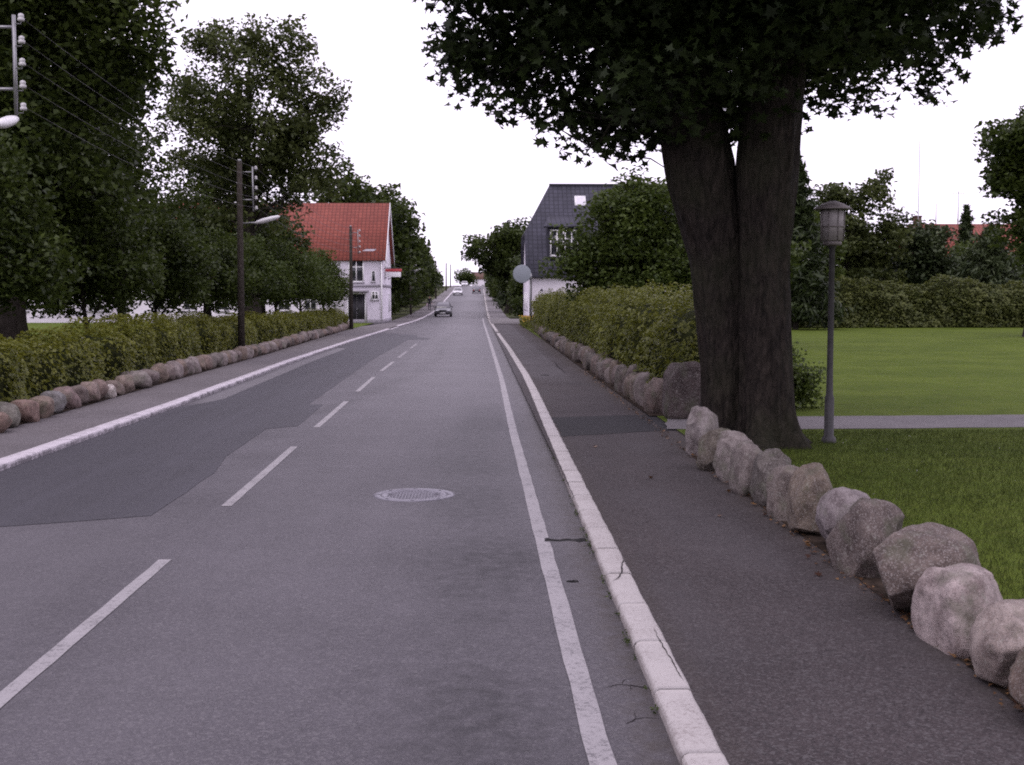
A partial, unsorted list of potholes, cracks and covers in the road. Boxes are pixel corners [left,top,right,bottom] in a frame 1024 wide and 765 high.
manhole cover [373,488,455,502]
